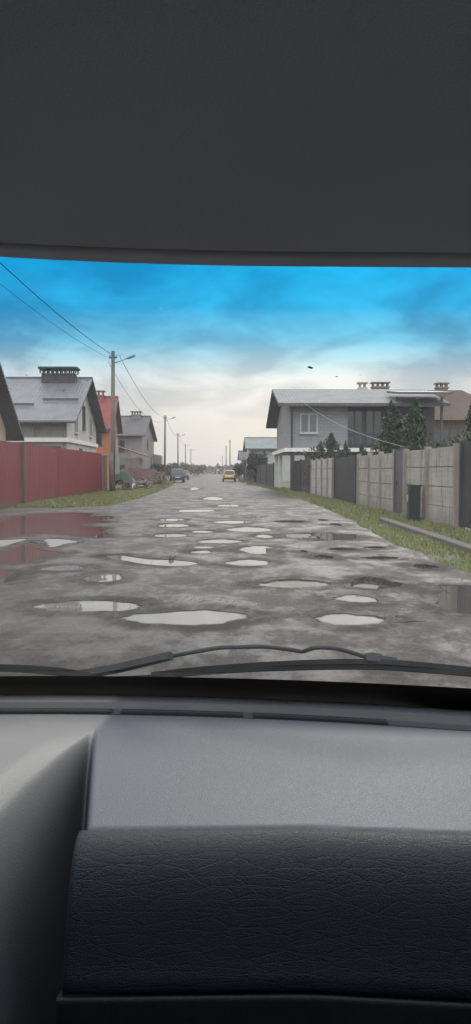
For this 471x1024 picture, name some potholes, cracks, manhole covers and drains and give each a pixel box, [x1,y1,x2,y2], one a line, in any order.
pothole [350,576,403,589]
pothole [105,555,197,566]
pothole [313,613,387,625]
pothole [333,594,379,603]
pothole [120,609,252,625]
pothole [254,578,332,588]
pothole [285,533,363,541]
pothole [82,573,123,582]
pothole [32,599,143,611]
